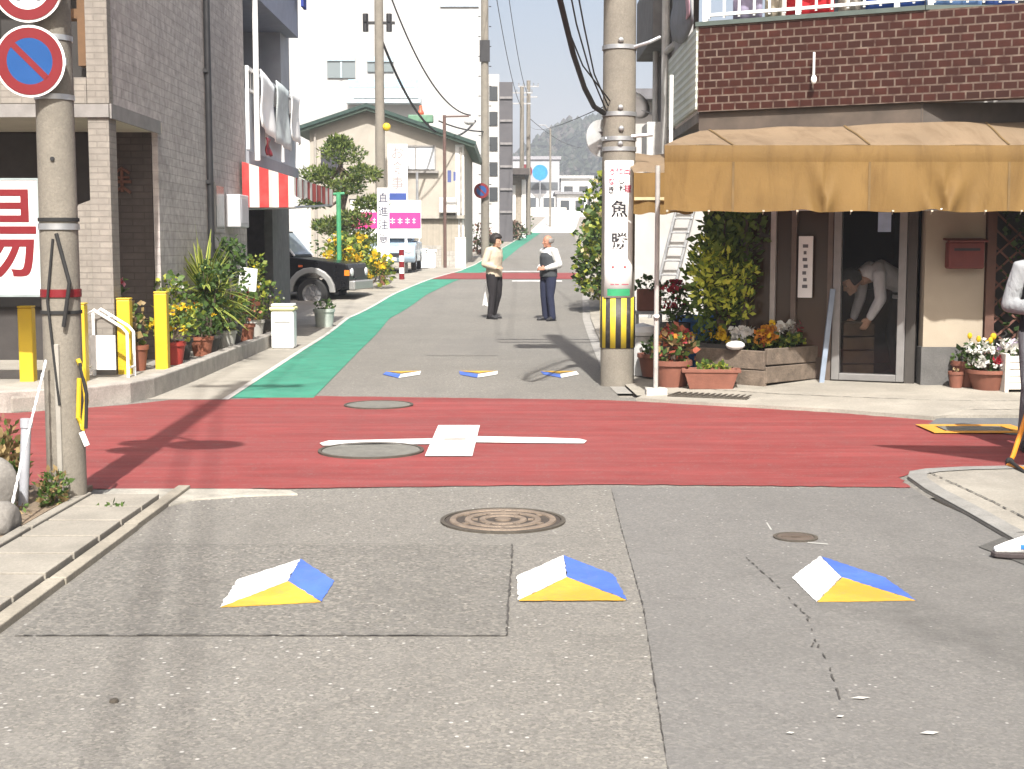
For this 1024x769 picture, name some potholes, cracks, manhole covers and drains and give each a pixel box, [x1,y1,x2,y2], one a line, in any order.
manhole cover [318,442,424,459]
utility cover [915,424,1018,433]
utility cover [773,532,818,542]
manhole cover [440,507,566,534]
manhole cover [344,400,413,409]
crack [746,557,841,699]
drain grate [667,391,752,400]
